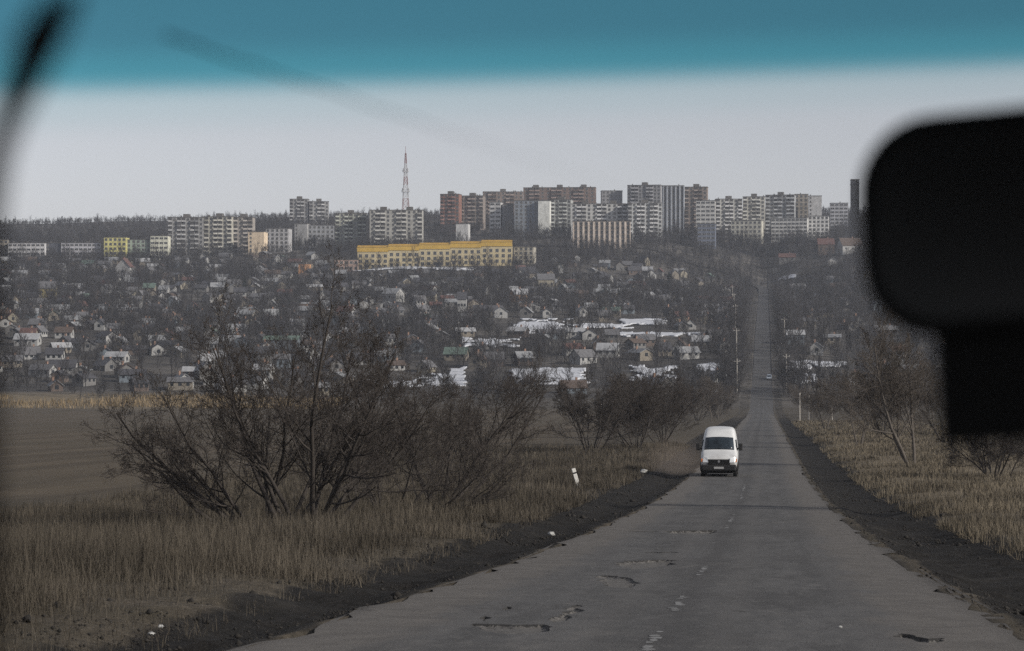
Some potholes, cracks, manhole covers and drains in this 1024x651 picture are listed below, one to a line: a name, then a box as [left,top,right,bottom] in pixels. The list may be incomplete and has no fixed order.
pothole [893,633,944,643]
pothole [471,624,552,635]
pothole [548,604,585,623]
pothole [594,575,639,588]
pothole [616,560,678,569]
